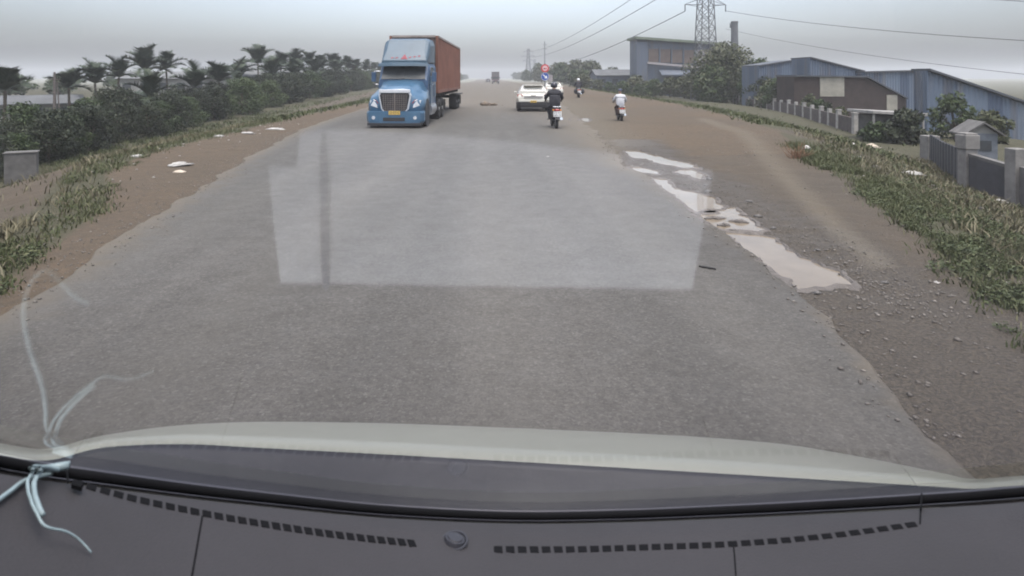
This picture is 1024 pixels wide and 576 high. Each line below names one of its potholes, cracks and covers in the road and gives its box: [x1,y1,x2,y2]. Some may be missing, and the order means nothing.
pothole [672,169,710,181]
pothole [651,177,730,215]
pothole [622,150,704,170]
pothole [722,230,861,294]
pothole [626,166,665,176]
pothole [689,206,771,234]
